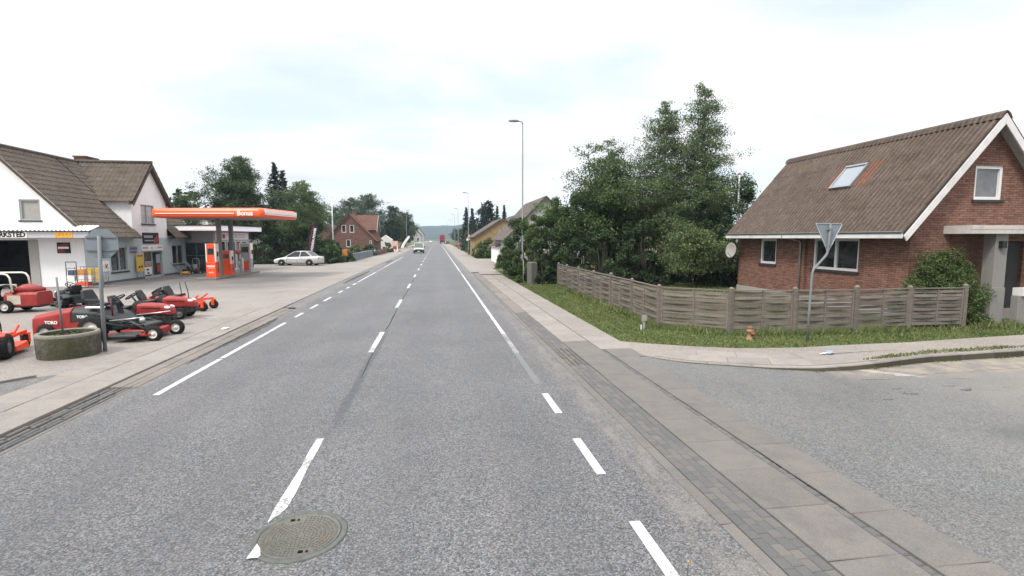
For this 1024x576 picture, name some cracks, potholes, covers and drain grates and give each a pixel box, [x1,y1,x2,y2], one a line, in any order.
manhole cover [250,511,348,564]
